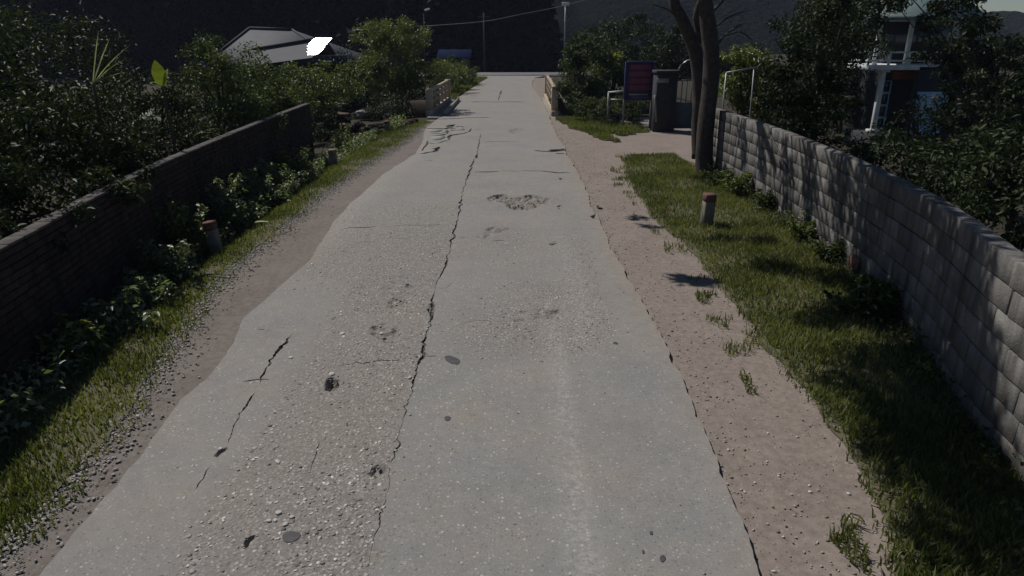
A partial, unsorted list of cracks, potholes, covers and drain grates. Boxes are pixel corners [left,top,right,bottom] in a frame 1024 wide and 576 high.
pothole [370,460,390,479]
pothole [324,377,341,392]
pothole [486,194,552,210]
pothole [367,323,405,343]
crack [227,329,291,445]
